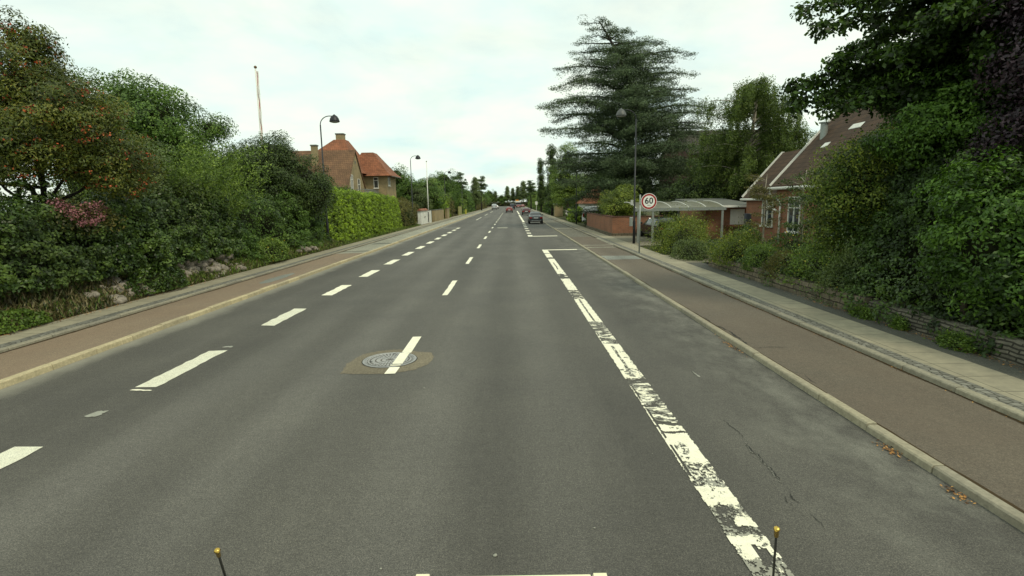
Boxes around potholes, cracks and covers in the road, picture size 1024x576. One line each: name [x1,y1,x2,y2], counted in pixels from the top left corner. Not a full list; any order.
crack [722,417,822,524]
manhole cover [362,352,417,368]
